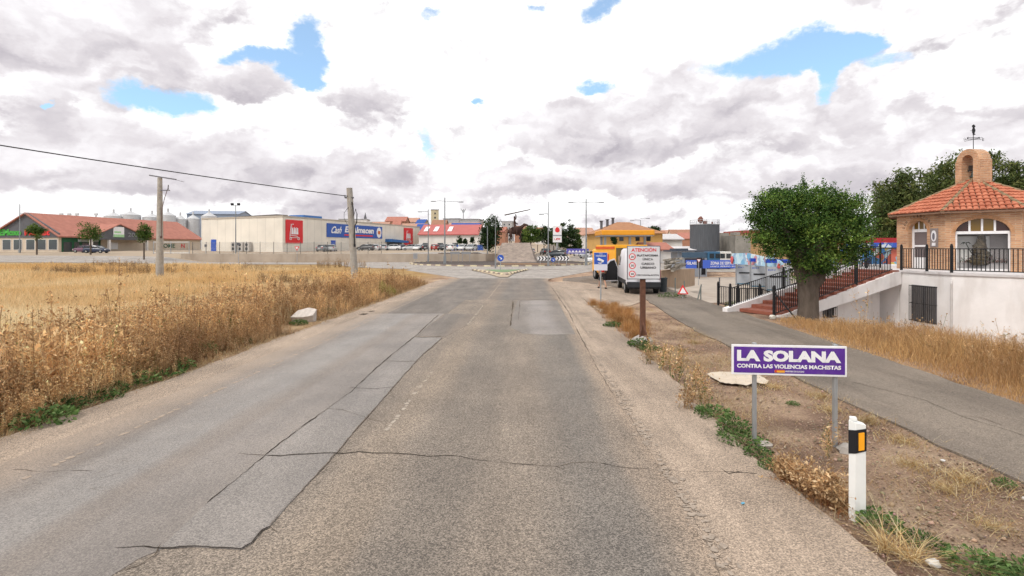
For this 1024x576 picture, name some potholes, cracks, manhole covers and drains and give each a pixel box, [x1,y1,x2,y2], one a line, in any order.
crack [115,290,757,574]
